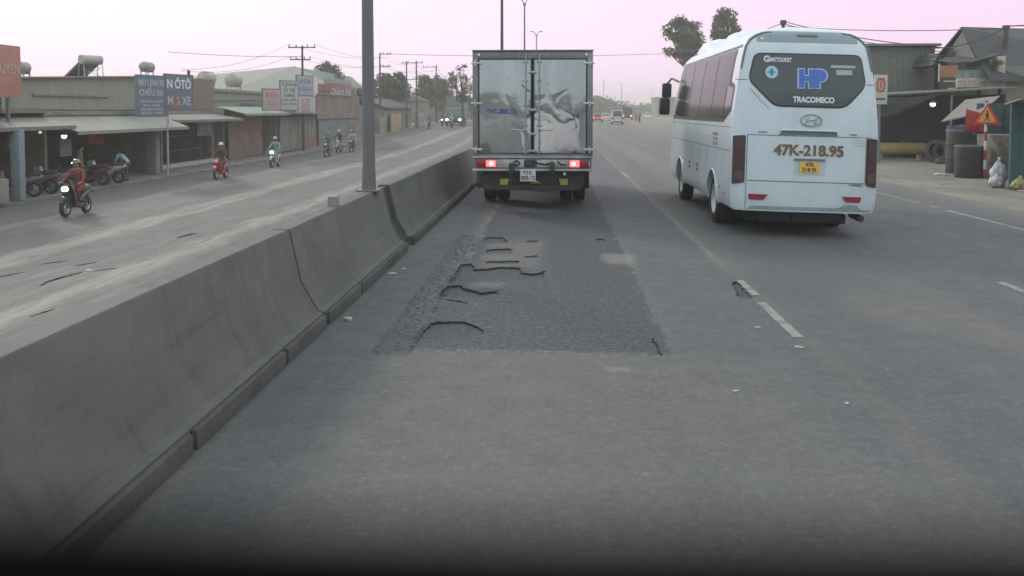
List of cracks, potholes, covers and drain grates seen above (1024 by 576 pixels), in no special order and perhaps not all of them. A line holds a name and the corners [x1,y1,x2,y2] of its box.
pothole [731,282,754,300]
crack [40,261,114,286]
